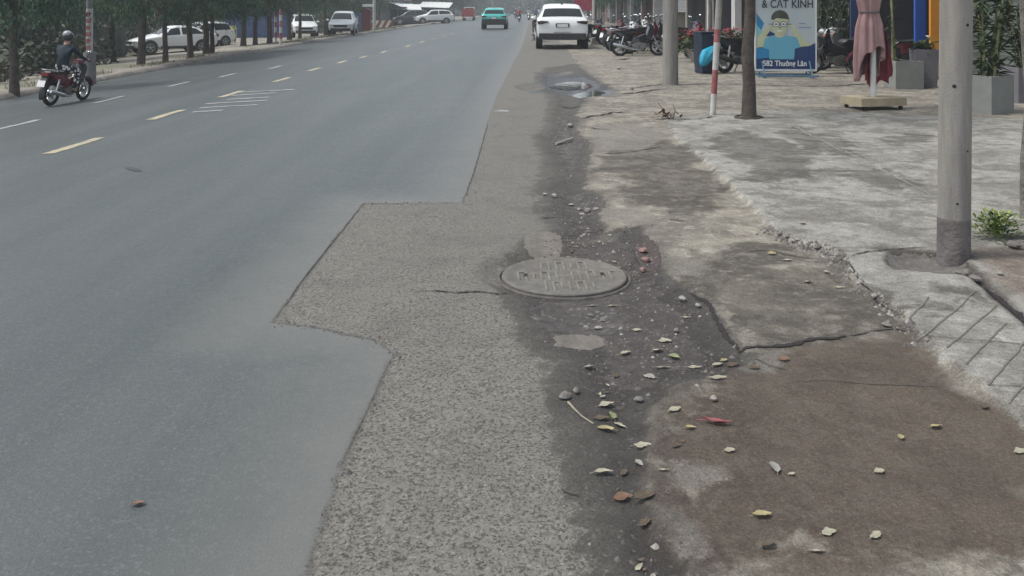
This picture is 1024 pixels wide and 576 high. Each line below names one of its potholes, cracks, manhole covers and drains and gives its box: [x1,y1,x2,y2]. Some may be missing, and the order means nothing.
crack [689,292,935,386]
manhole cover [497,257,631,300]
crack [848,247,916,311]
pothole [543,76,601,92]
